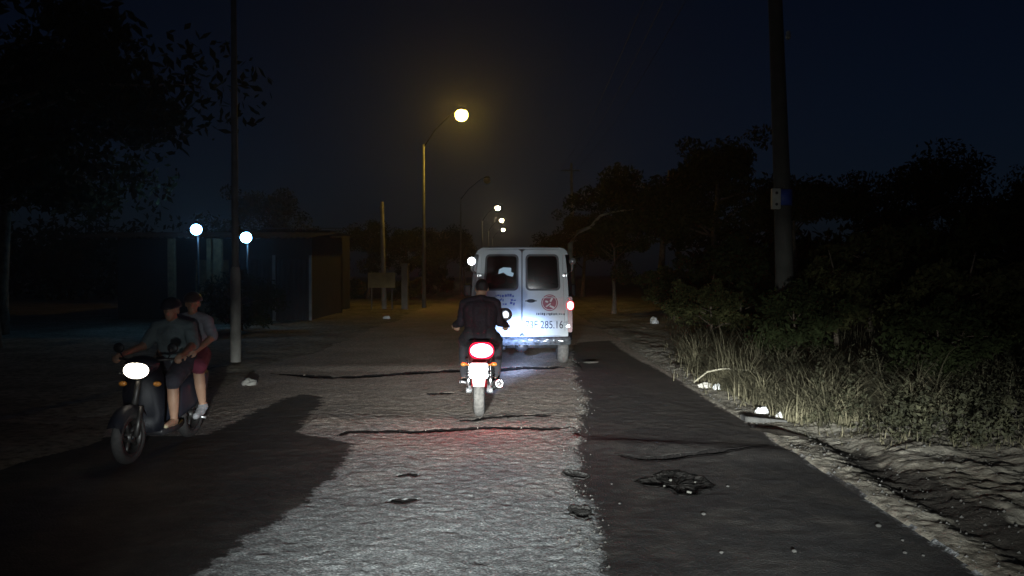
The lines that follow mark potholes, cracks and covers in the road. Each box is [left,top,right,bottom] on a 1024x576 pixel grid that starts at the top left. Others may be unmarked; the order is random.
crack [614,445,768,461]
crack [270,366,577,395]
crack [334,415,576,438]
pothole [568,505,592,520]
pothole [633,470,717,497]
pothole [562,469,590,479]
